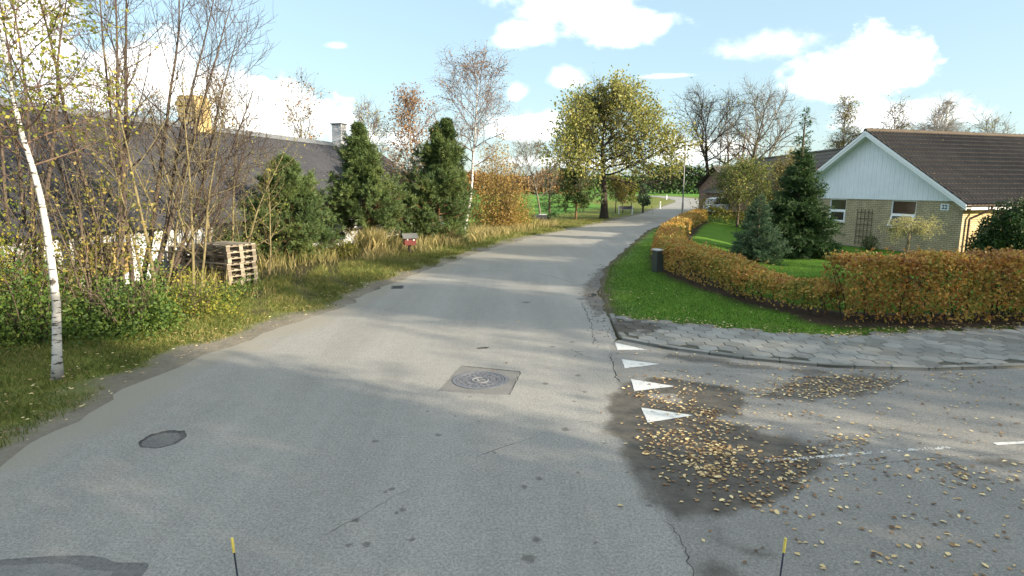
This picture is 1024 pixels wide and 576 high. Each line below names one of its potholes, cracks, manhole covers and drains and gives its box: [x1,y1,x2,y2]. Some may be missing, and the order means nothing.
crack [662,518,694,576]
manhole cover [452,371,509,389]
crack [571,302,620,382]
